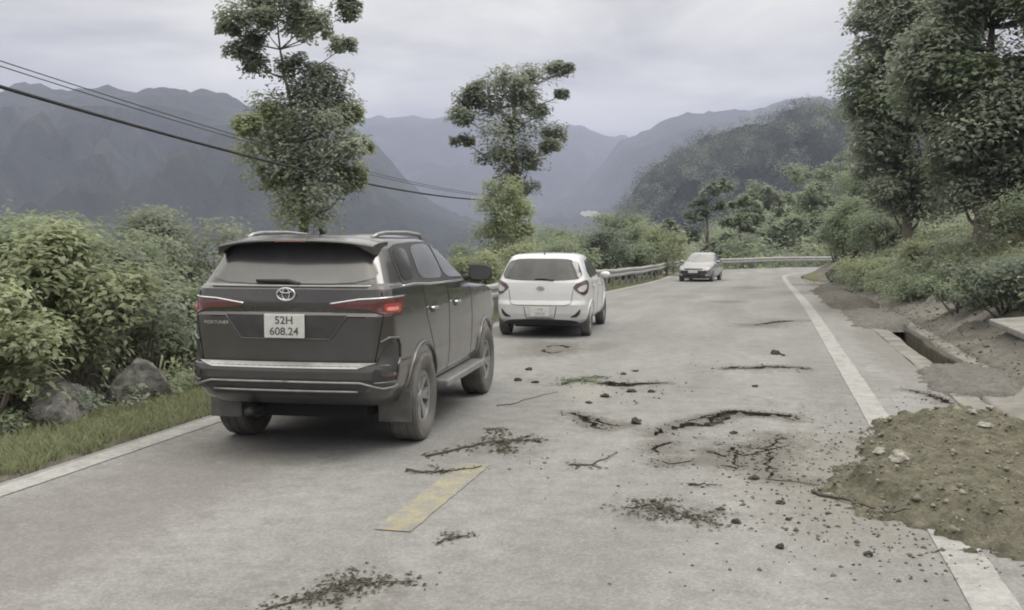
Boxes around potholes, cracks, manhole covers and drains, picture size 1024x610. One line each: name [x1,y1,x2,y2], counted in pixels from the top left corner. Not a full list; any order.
crack [570,413,617,430]
crack [651,410,816,485]
